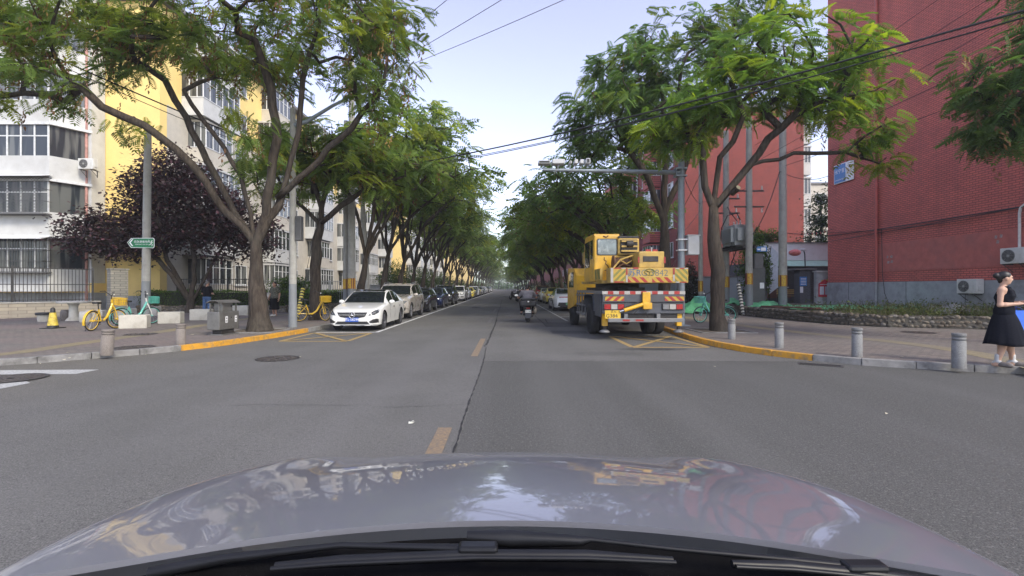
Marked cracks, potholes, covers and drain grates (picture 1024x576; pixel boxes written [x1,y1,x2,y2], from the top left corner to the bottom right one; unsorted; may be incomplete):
manhole cover [0,373,50,383]
